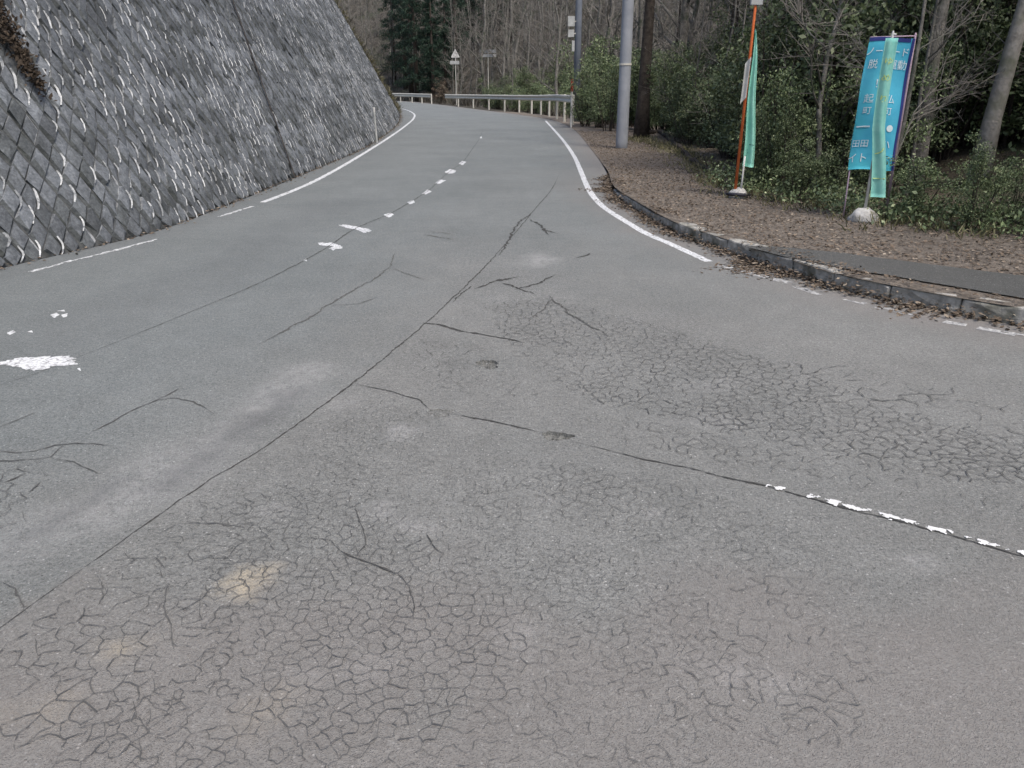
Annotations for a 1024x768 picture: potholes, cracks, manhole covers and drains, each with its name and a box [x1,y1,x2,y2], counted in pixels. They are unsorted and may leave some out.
crack [413,323,539,401]
crack [453,275,604,332]
pothole [476,360,499,369]
crack [0,388,213,527]
crack [297,399,532,521]
crack [0,481,269,760]
crack [51,457,774,768]
pothole [542,431,575,441]
crack [521,459,911,745]
crack [483,298,1024,521]
